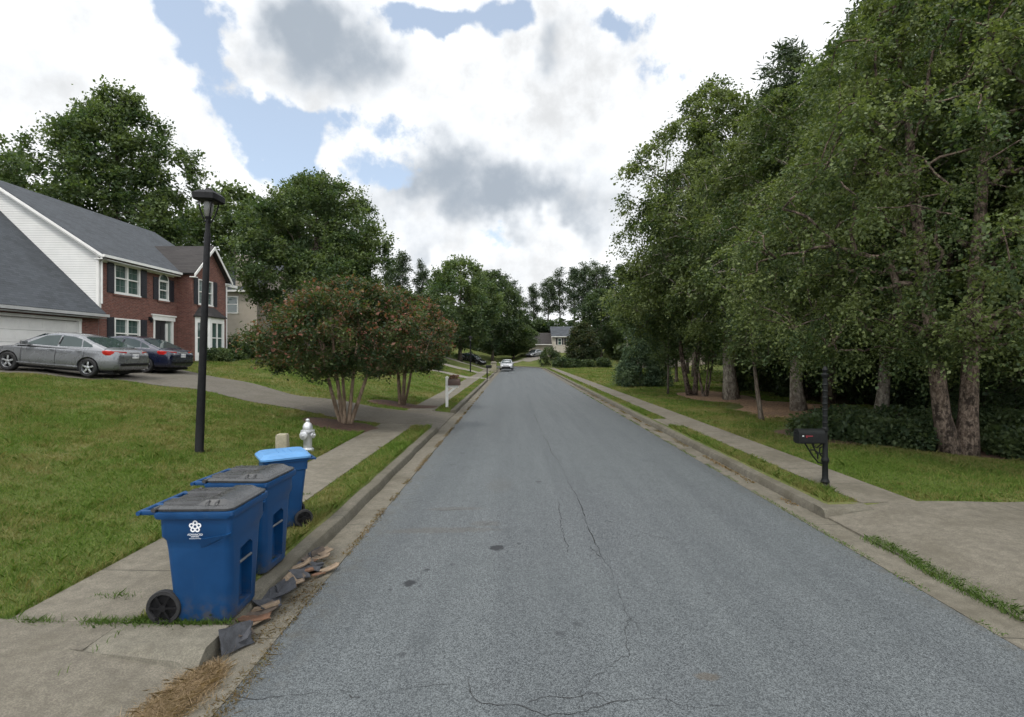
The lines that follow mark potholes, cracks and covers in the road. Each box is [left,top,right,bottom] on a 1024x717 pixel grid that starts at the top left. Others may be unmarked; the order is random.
crack [243,385,732,716]
